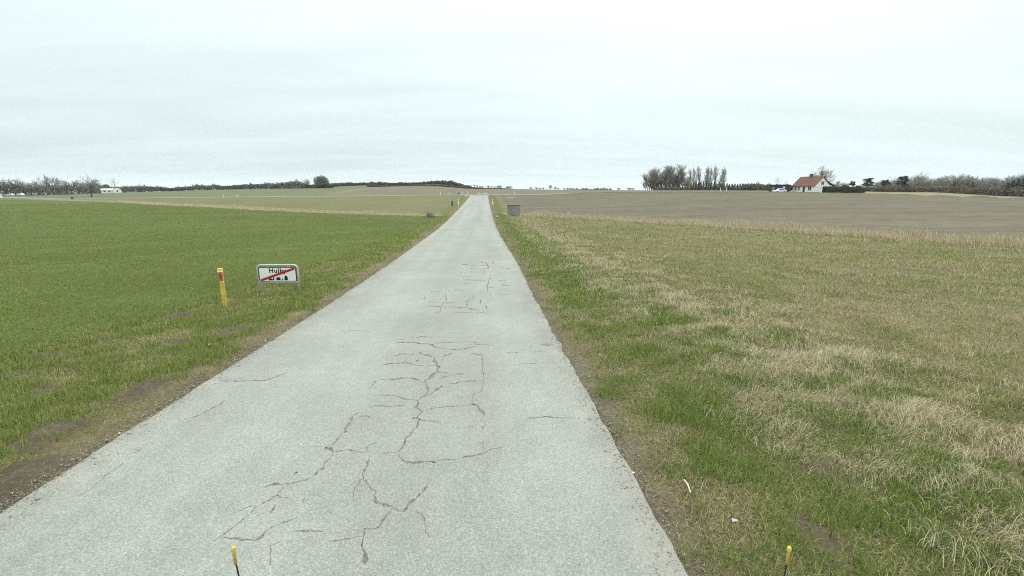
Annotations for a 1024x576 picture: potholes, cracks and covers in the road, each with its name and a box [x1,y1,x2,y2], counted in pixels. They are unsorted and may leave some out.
crack [424,261,510,314]
crack [214,336,503,566]
